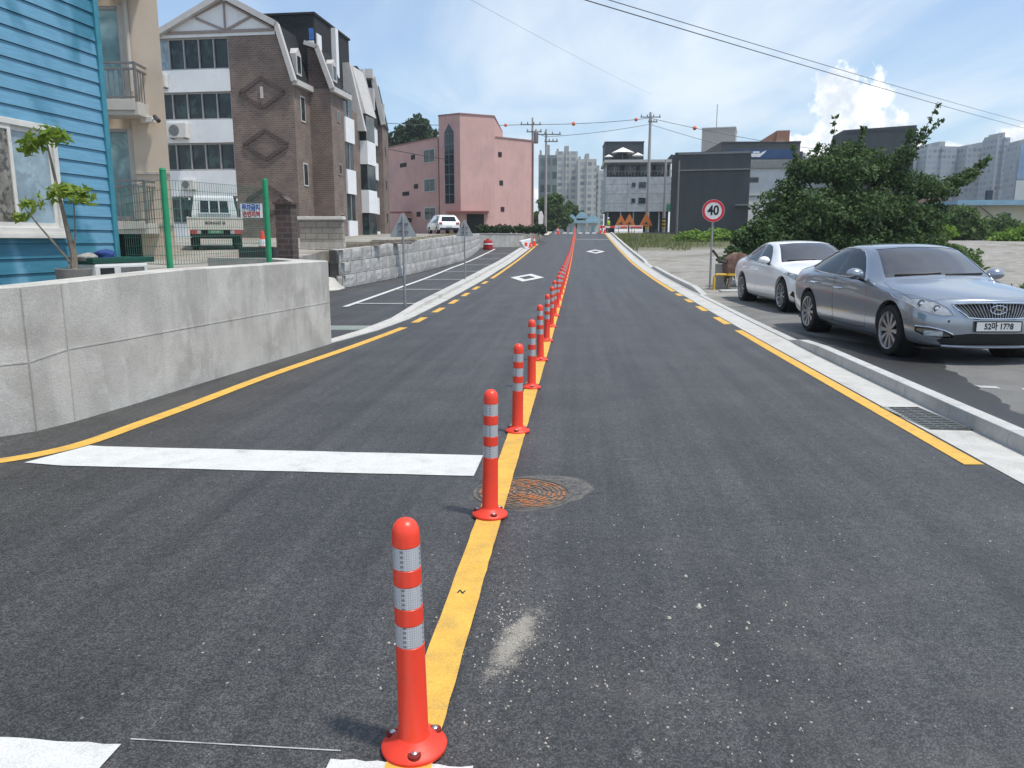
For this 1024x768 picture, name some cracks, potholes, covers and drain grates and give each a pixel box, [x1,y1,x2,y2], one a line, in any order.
drain grate [881,407,973,431]
manhole cover [473,478,571,509]
